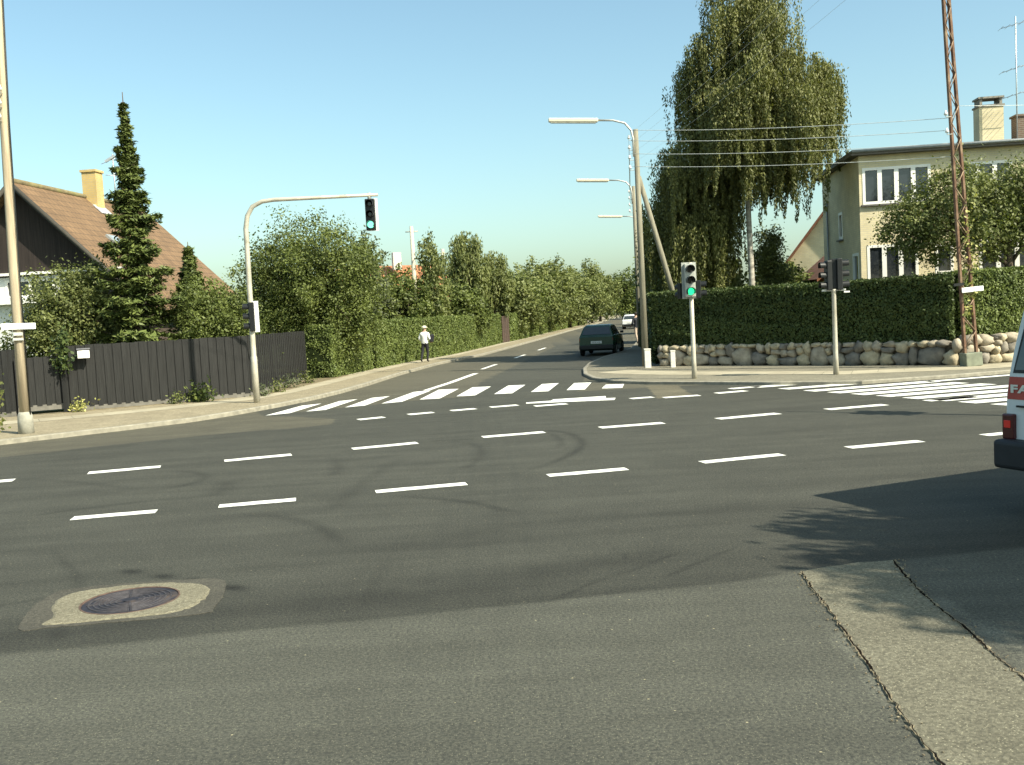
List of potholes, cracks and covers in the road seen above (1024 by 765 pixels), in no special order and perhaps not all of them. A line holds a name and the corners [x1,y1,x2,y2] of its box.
manhole cover [42,582,210,625]
